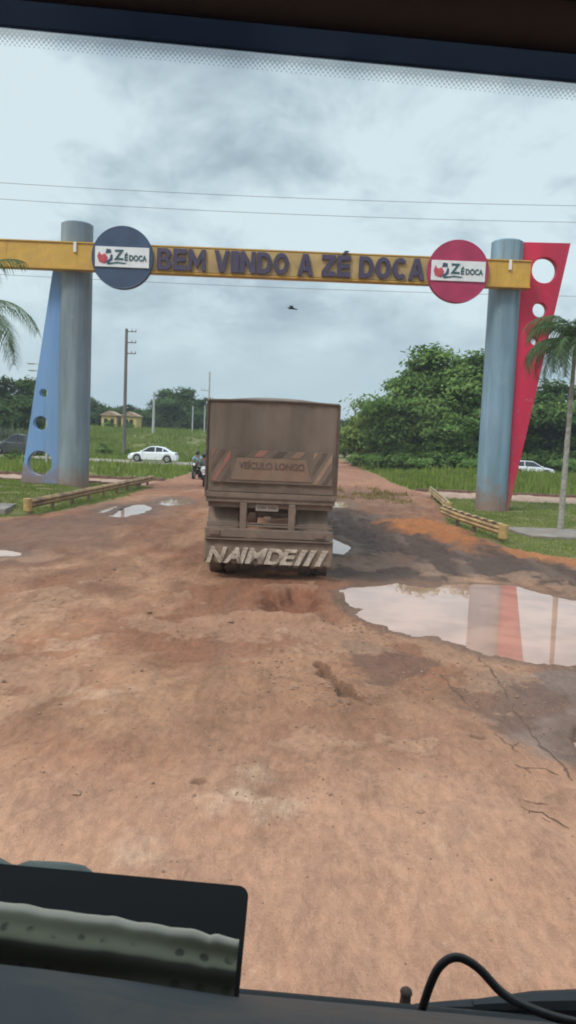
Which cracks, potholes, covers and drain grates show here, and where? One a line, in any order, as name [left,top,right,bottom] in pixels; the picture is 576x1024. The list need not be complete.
pothole [312,661,380,707]
pothole [255,586,326,614]
crack [478,658,572,780]
crack [521,799,569,828]
pothole [339,581,576,669]
